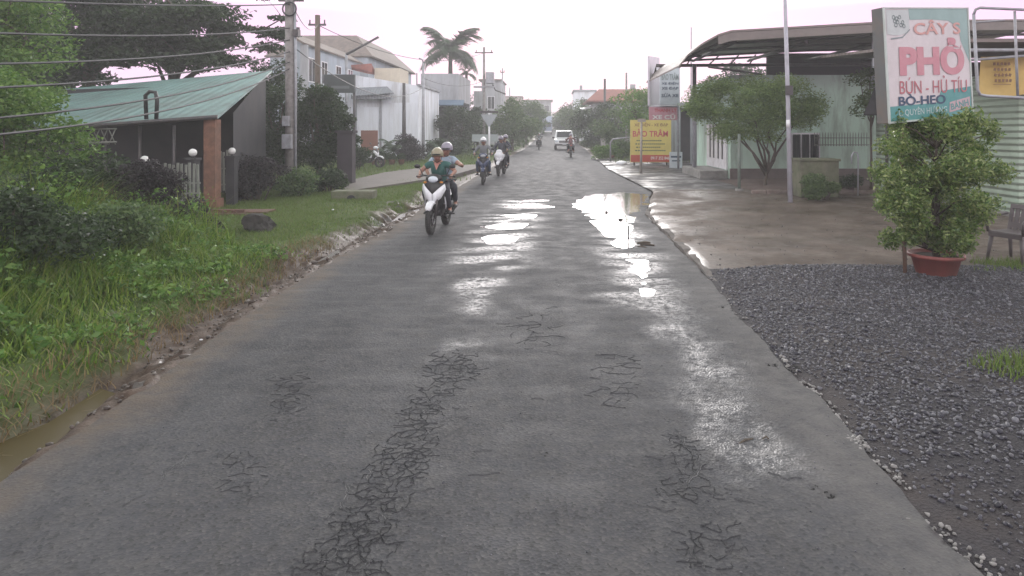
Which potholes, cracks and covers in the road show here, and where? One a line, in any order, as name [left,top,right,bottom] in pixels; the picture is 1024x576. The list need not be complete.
crack [645,428,755,570]
crack [496,306,563,349]
crack [122,450,267,507]
crack [588,354,641,408]
crack [292,350,489,576]
crack [263,360,326,422]
